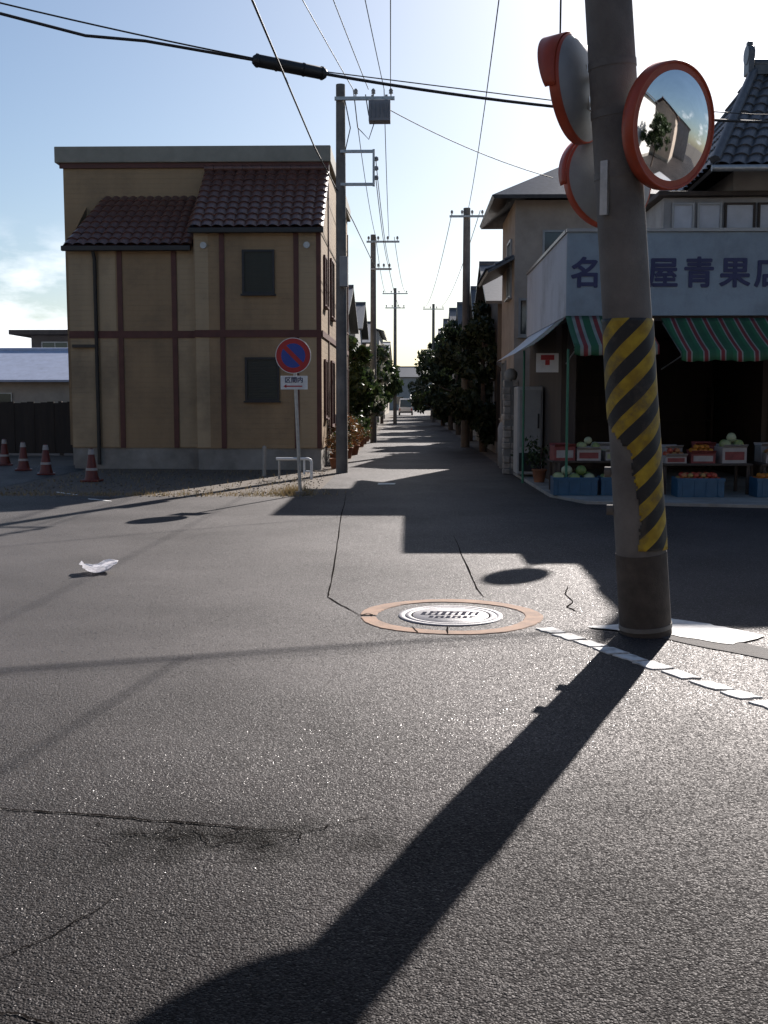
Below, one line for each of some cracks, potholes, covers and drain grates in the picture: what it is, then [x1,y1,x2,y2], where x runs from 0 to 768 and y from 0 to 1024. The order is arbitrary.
crack [0,807,375,845]
manhole cover [360,599,543,635]
crack [0,892,118,957]
